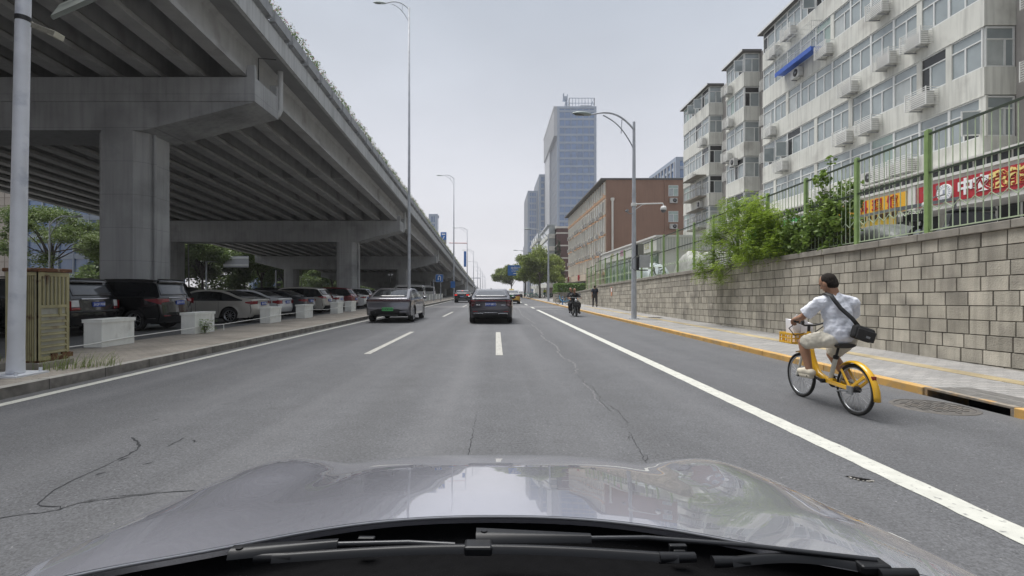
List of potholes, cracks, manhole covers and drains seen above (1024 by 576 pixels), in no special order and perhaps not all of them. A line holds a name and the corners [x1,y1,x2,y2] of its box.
crack [1,418,195,518]
crack [514,308,648,463]
manhole cover [889,399,983,416]
drain grate [924,387,1024,417]
